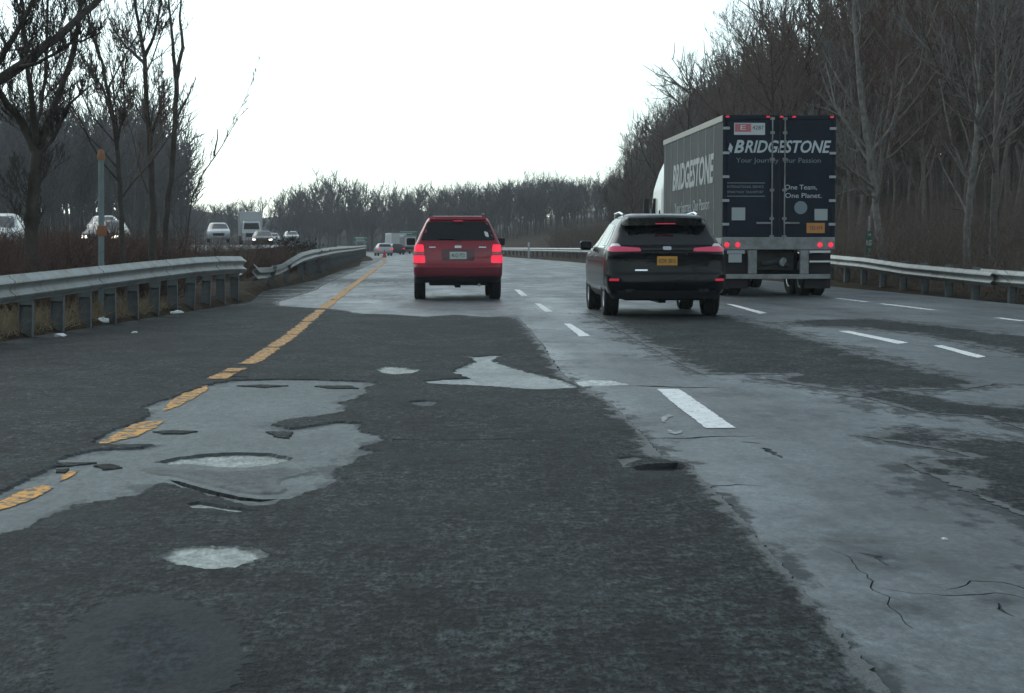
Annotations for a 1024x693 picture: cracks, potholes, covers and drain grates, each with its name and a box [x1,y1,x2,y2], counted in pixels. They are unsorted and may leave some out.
pothole [424,354,580,389]
pothole [631,463,686,471]
crack [653,436,783,458]
pothole [617,456,650,467]
crack [828,548,1024,629]
pothole [155,545,269,569]
pothole [0,379,386,535]
